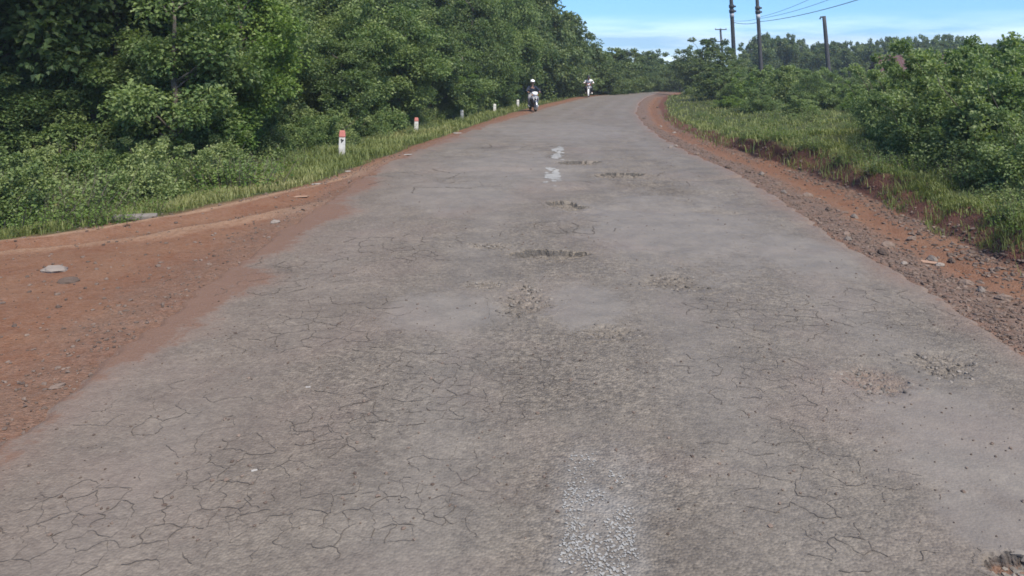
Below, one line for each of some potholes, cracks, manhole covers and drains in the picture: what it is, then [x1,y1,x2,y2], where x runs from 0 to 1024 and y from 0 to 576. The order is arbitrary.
pothole [485,276,569,334]
crack [674,339,949,572]
crack [0,231,586,576]
pothole [884,345,992,386]
crack [681,288,958,341]
pothole [810,358,936,405]
pothole [540,199,595,213]
pothole [969,545,1024,576]
pothole [495,248,603,262]
pothole [622,269,722,295]
